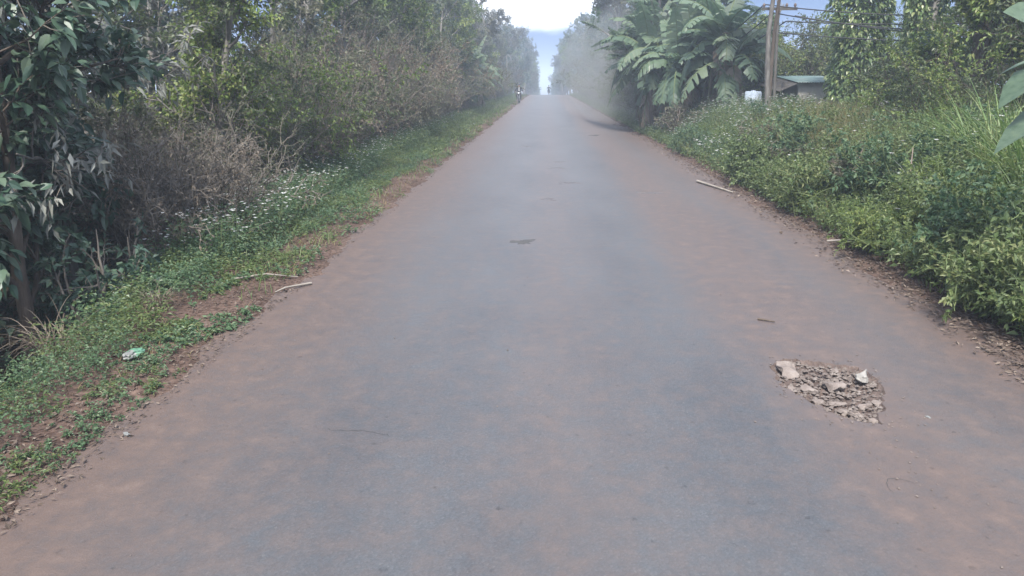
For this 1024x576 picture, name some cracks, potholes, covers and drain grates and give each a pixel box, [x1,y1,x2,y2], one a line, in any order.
pothole [769,358,886,425]
